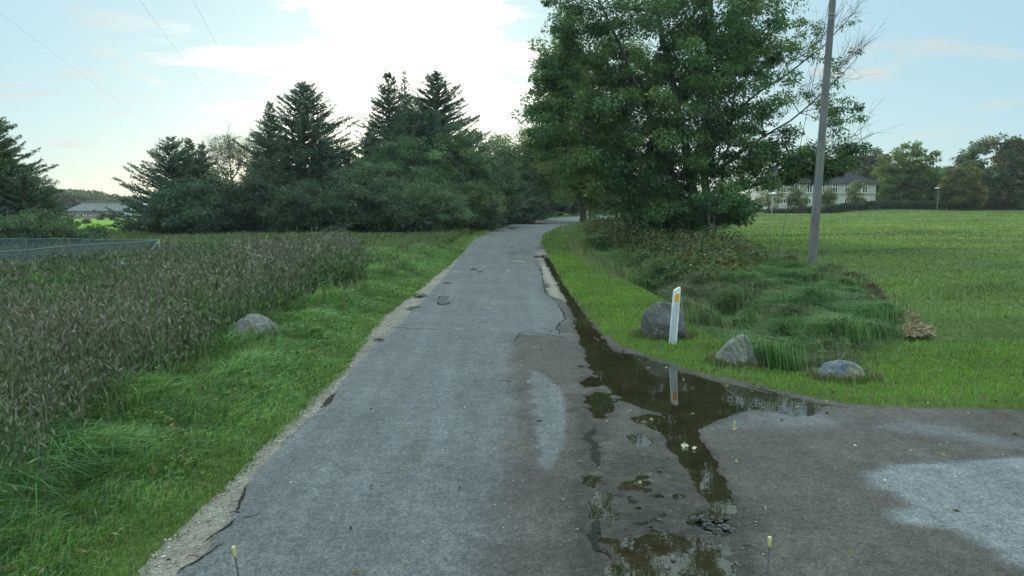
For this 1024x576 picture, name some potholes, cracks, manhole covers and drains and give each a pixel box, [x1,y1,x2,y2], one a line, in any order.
crack [586,501,612,558]
crack [514,260,566,342]
crack [582,426,601,467]
crack [177,485,257,573]
pothole [682,510,741,538]
